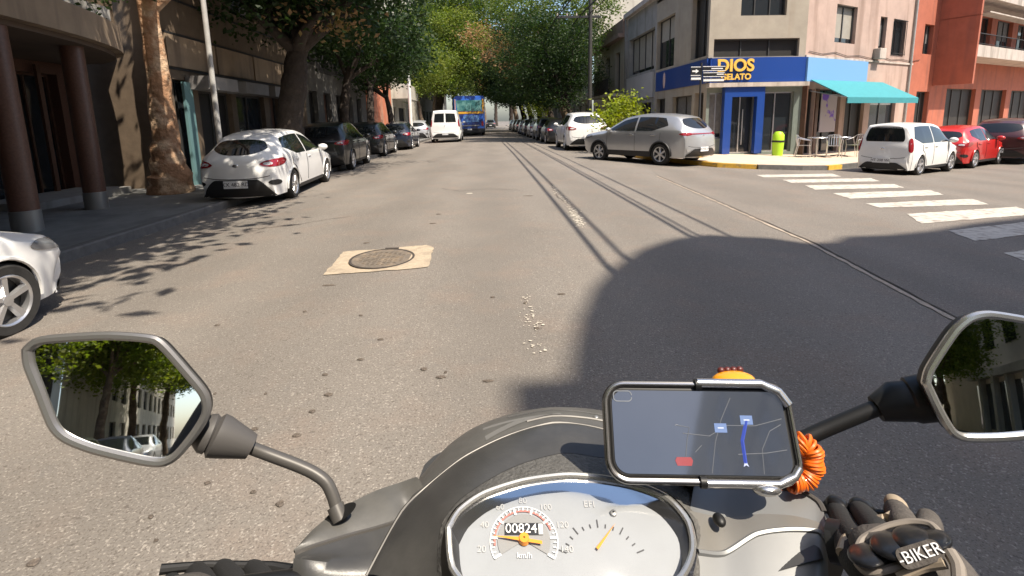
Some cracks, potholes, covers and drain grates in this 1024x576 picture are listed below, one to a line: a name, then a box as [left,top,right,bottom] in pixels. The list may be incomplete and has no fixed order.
manhole cover [323,245,434,275]
